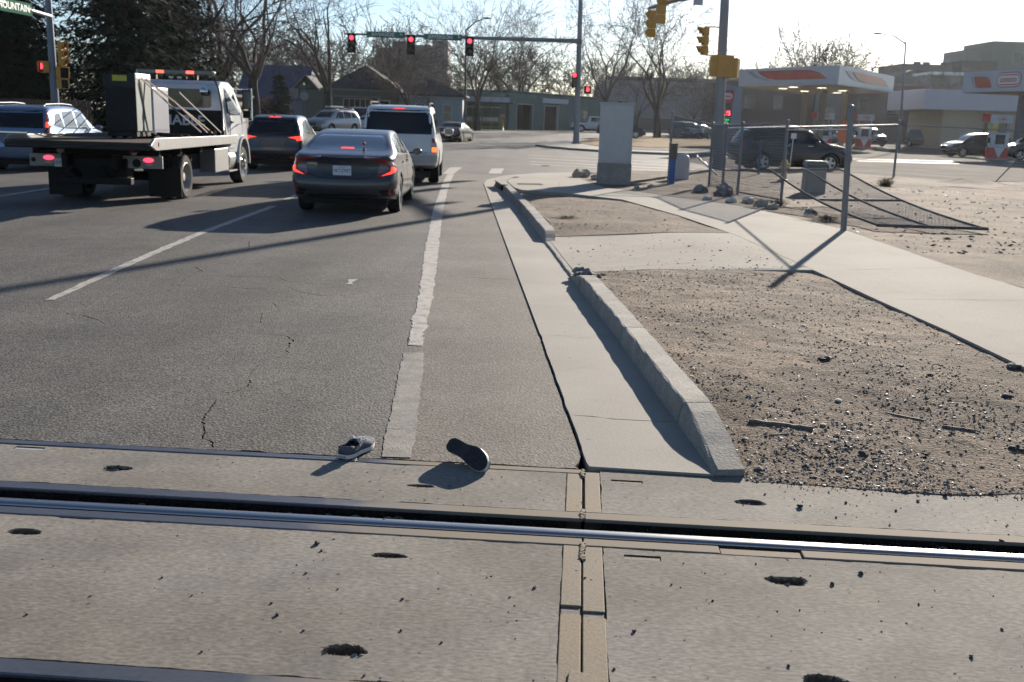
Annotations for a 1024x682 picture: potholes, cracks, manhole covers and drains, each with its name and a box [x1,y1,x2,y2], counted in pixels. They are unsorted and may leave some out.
pothole [319,643,368,656]
pothole [764,575,808,586]
crack [201,365,259,448]
pothole [802,673,849,682]
